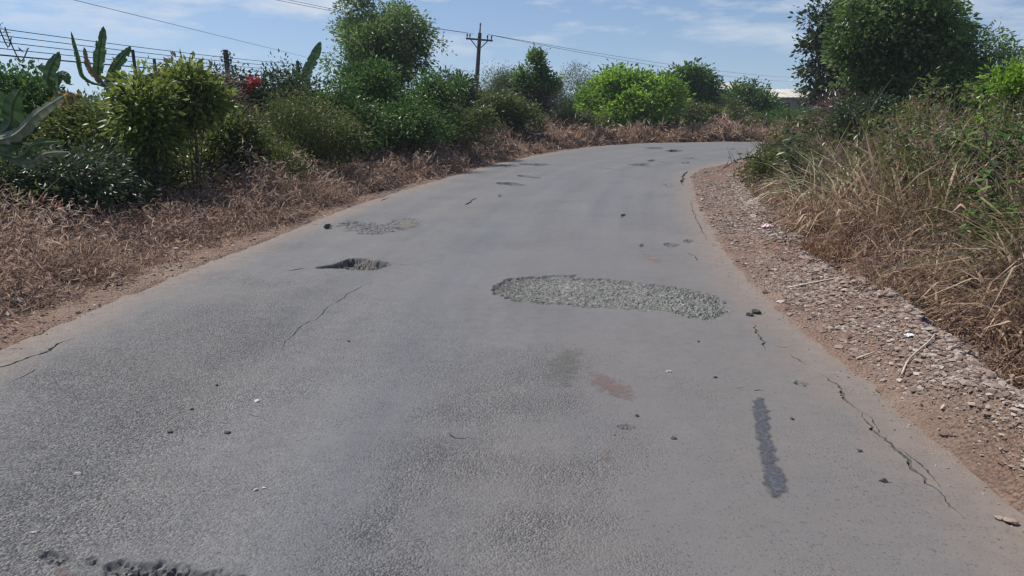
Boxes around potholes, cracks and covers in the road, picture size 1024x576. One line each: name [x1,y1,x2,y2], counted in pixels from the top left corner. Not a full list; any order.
pothole [98,557,249,576]
pothole [315,258,392,271]
crack [753,325,965,519]
crack [283,283,370,347]
pothole [38,550,73,567]
crack [1,340,68,380]
pothole [84,556,103,566]
